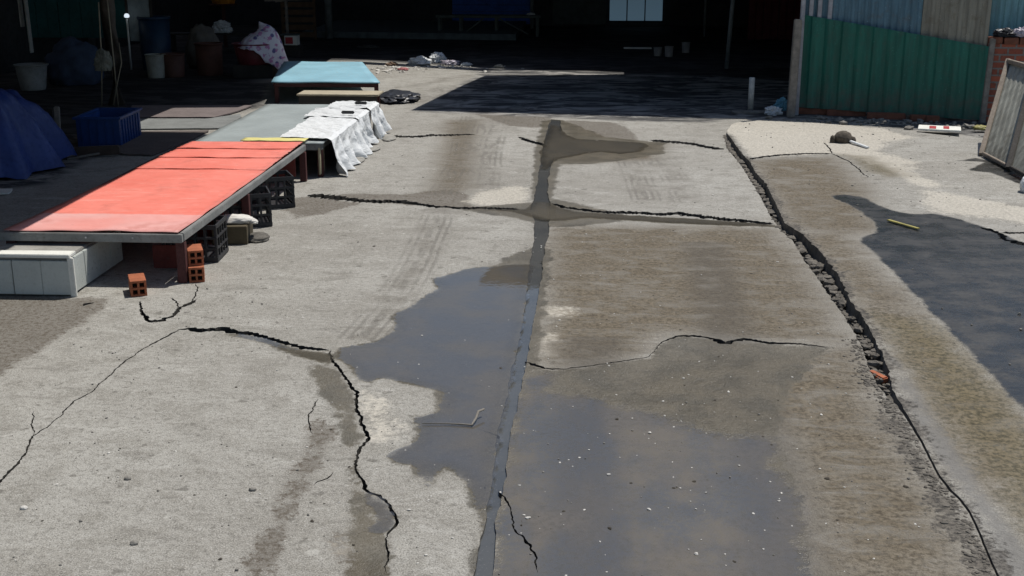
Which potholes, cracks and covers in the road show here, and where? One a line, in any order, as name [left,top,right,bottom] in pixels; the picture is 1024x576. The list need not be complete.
crack [525,134,1024,576]
crack [0,284,399,572]
crack [307,194,520,210]
crack [499,493,538,572]
